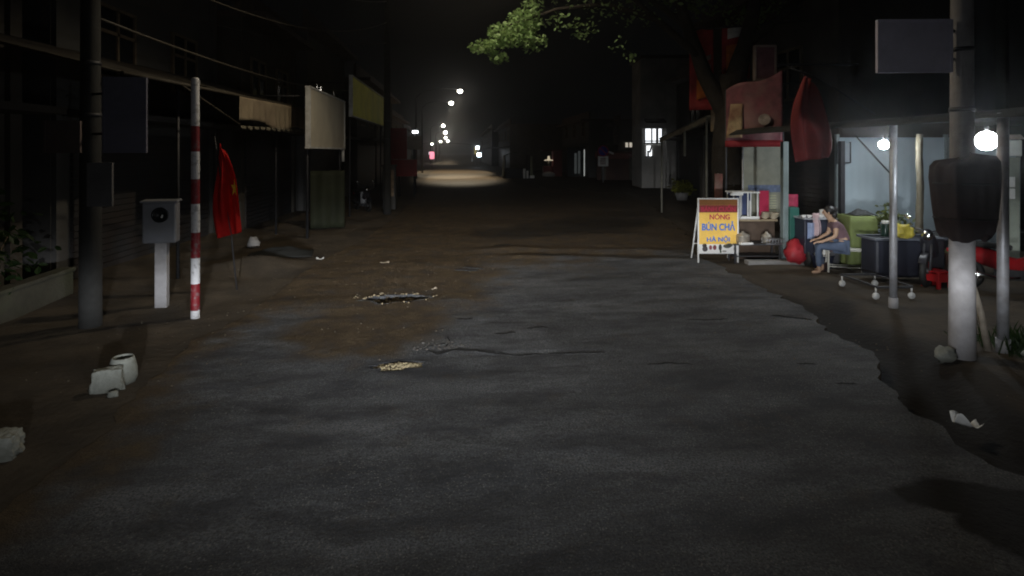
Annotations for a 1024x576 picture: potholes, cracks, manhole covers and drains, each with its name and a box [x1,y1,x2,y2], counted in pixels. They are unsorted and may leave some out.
crack [412,318,606,357]
pothole [354,292,437,305]
pothole [364,360,430,372]
